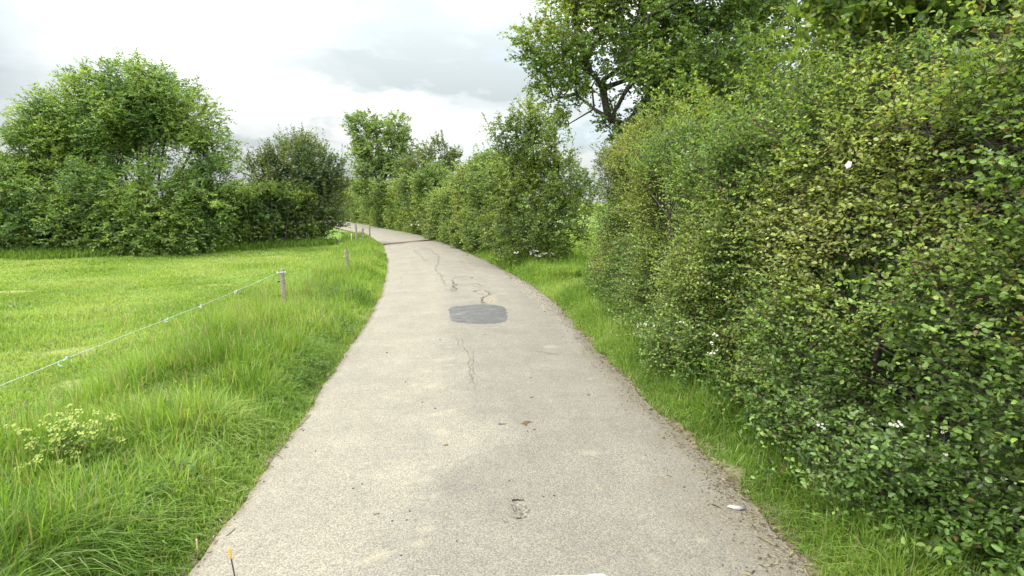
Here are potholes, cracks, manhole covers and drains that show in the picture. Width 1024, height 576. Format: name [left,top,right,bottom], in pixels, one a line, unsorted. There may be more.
crack [411,246,513,303]
crack [456,339,475,387]
pothole [512,501,530,518]
